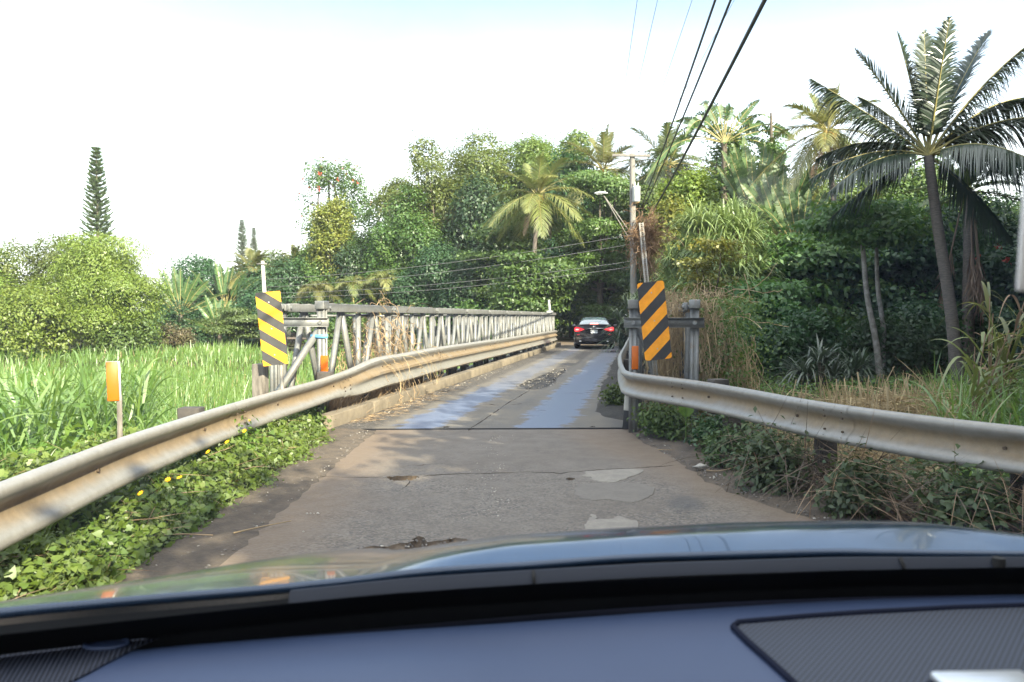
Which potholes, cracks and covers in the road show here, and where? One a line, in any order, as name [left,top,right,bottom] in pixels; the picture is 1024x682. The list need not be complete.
pothole [519,368,567,390]
crack [319,464,672,489]
pothole [357,536,470,550]
